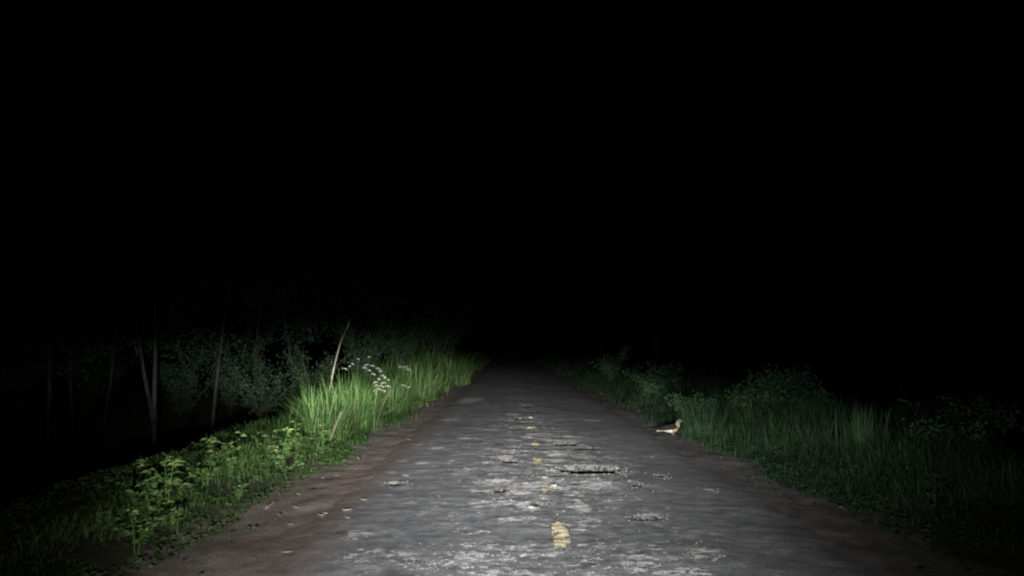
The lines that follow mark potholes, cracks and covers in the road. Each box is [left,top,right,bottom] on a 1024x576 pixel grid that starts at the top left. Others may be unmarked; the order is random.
pothole [553,466,625,475]
